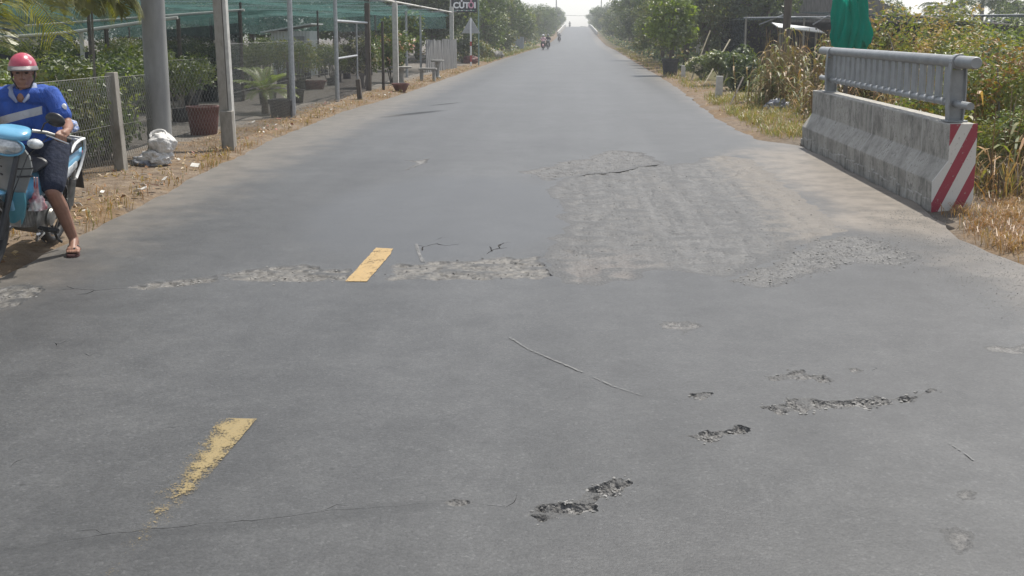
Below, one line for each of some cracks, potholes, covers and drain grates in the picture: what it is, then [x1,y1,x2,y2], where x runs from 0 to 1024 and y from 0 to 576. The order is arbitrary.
pothole [762,369,834,383]
pothole [686,392,714,401]
pothole [687,424,751,444]
crack [45,495,517,545]
pothole [530,477,637,525]
pothole [760,388,942,416]
